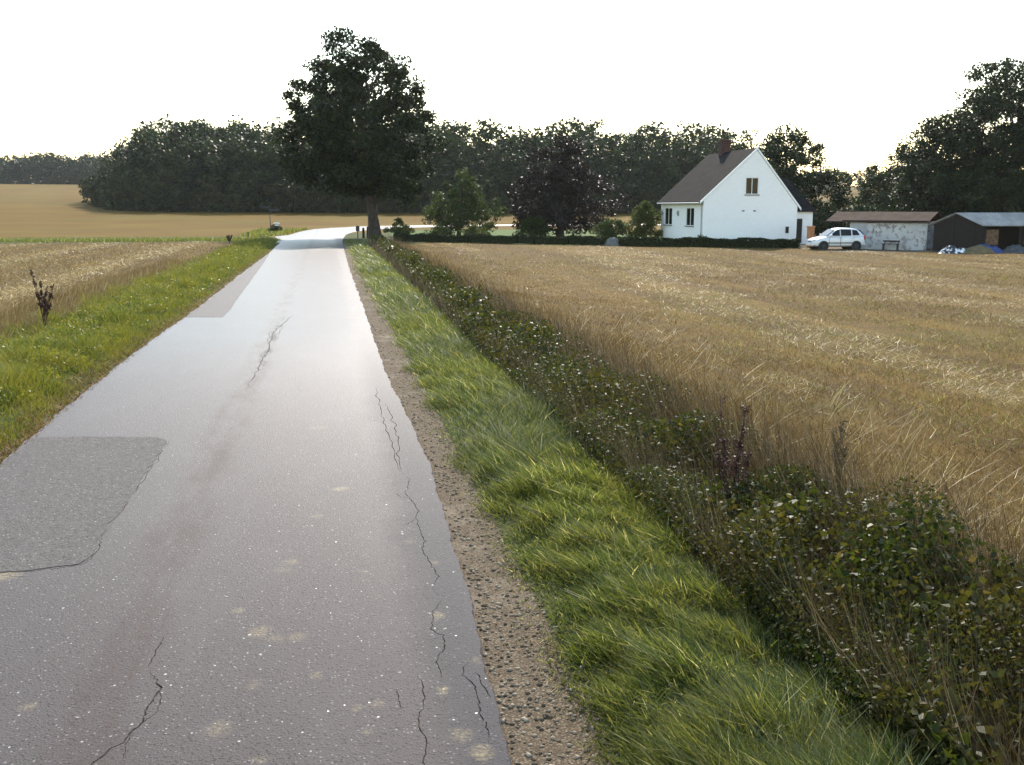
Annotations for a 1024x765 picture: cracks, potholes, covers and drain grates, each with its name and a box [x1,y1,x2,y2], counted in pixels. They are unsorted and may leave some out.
crack [91,637,164,765]
crack [375,390,445,765]
crack [462,667,491,742]
